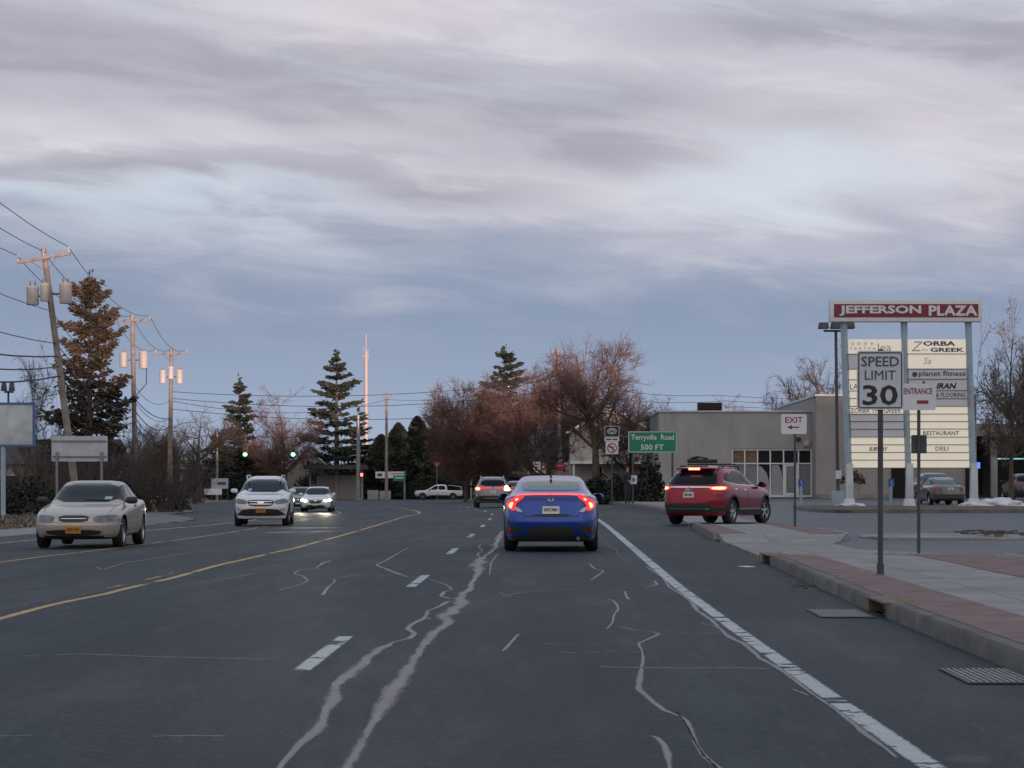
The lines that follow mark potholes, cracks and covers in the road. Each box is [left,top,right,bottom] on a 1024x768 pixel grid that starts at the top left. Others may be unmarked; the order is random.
drain grate [806,609,875,618]
crack [23,524,897,768]
drain grate [939,668,1024,685]
